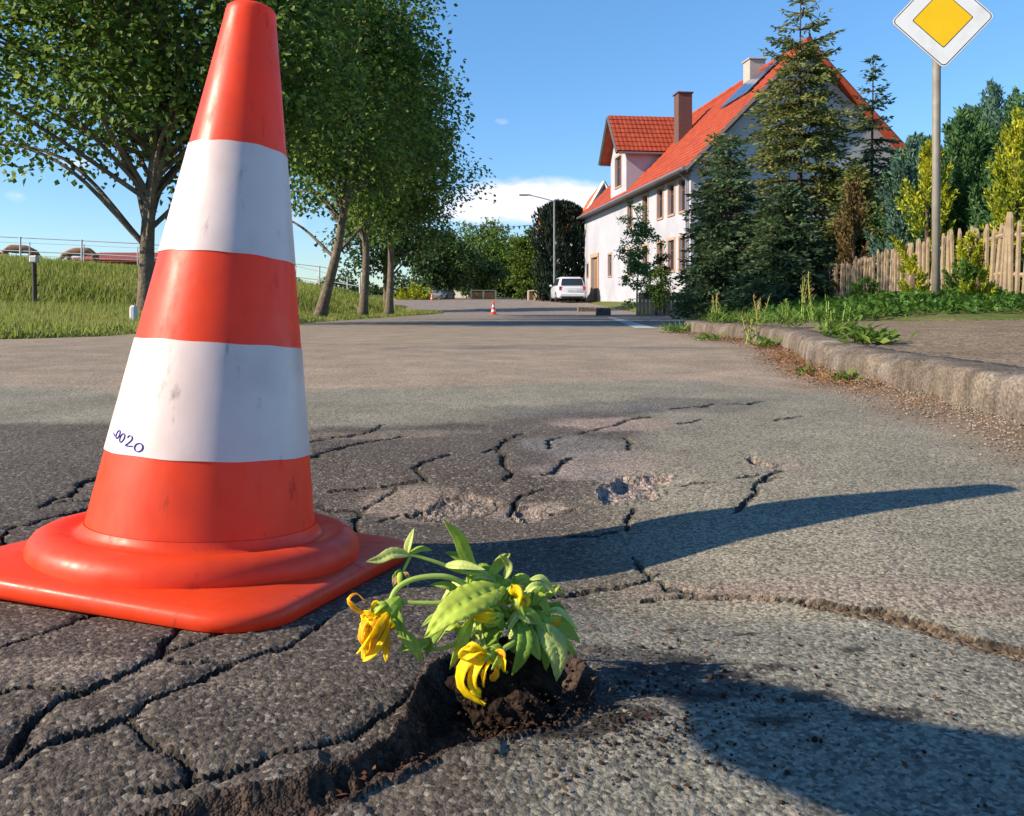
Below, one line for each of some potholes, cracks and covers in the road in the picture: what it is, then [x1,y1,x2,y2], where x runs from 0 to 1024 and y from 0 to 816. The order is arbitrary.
crack [681,470,786,515]
pothole [594,474,675,506]
crack [483,416,651,538]
crack [0,614,413,795]
crack [669,401,804,425]
crack [309,423,452,533]
pothole [416,492,497,523]
crack [0,476,97,546]
